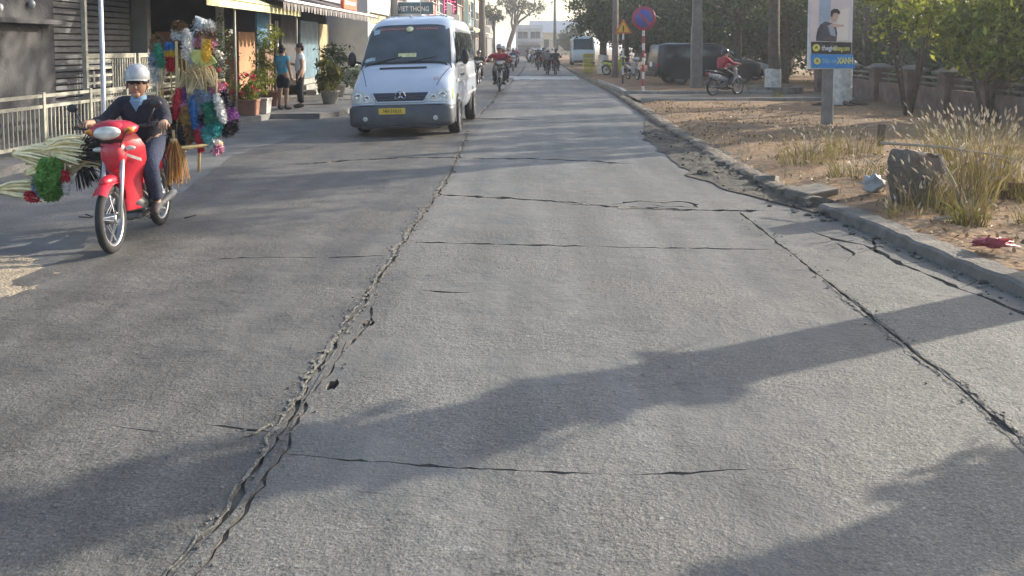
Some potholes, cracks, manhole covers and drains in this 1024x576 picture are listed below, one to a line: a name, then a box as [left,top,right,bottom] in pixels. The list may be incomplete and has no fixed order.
crack [440,194,757,212]
crack [206,406,786,475]
crack [423,242,758,250]
crack [807,229,1024,315]
